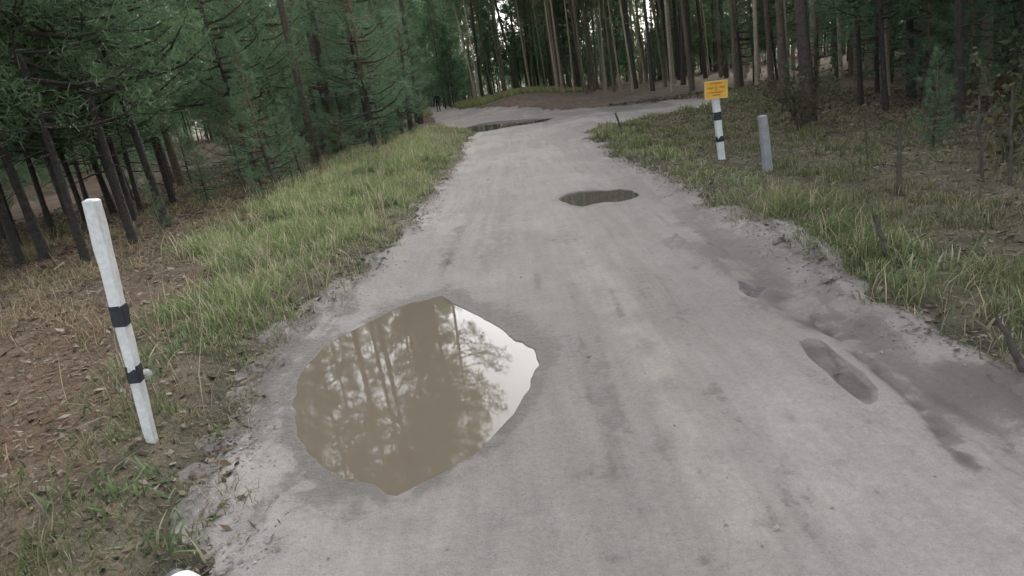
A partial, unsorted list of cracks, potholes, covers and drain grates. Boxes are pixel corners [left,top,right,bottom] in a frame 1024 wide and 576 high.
pothole [791,333,892,414]
pothole [462,116,563,132]
pothole [550,187,649,208]
pothole [275,292,554,510]
pothole [727,278,779,302]
